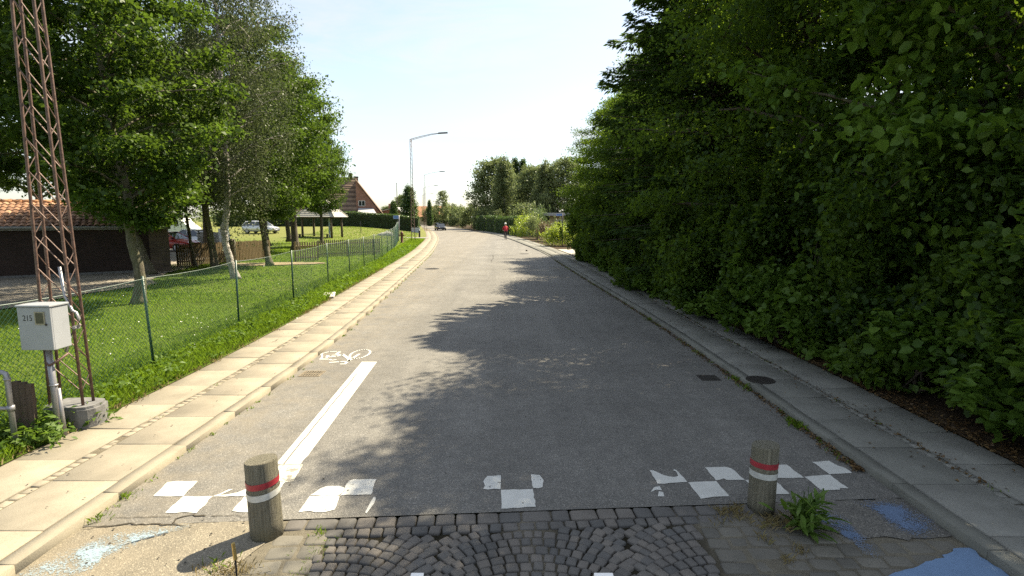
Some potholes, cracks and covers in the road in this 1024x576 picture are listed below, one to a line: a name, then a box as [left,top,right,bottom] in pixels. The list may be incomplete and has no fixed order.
manhole cover [746,376,775,384]
crack [90,514,247,529]
